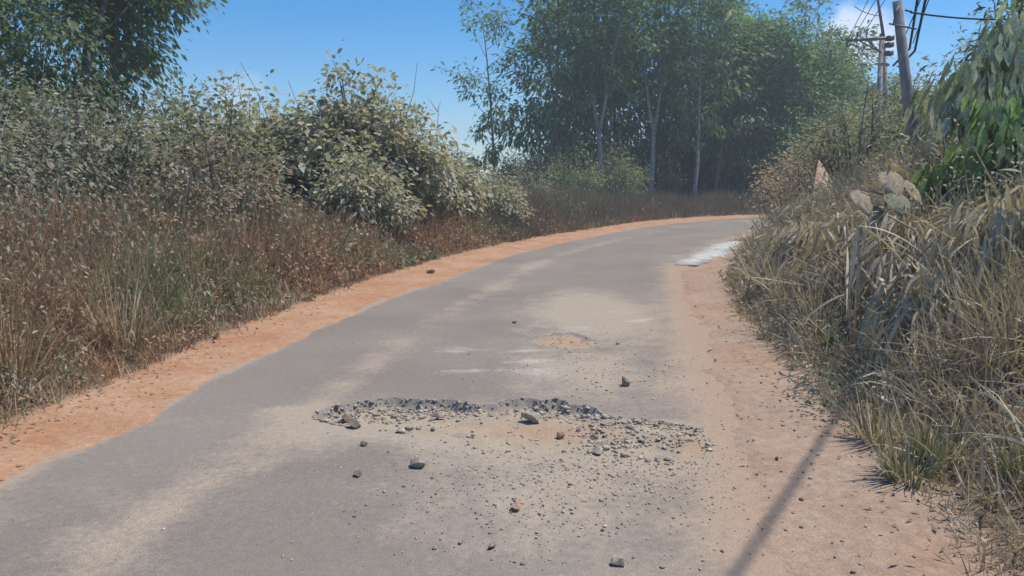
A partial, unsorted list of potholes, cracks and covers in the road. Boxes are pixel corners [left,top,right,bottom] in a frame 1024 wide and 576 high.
pothole [534,332,596,349]
pothole [311,397,715,463]
